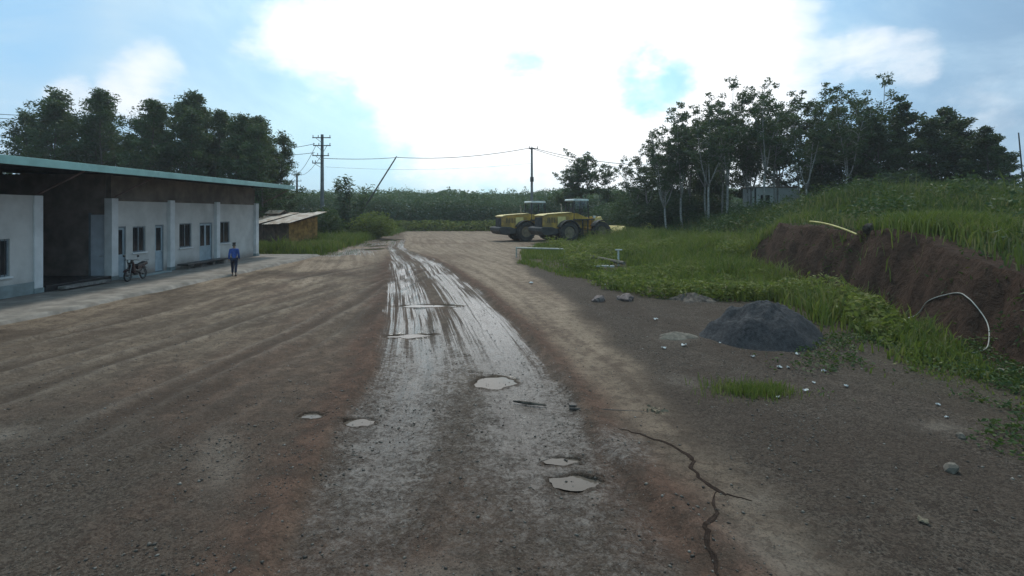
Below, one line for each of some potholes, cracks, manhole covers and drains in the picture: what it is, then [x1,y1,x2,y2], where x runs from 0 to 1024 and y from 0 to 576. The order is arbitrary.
pothole [467,374,524,391]
pothole [542,471,612,495]
crack [618,428,752,576]
pothole [537,457,587,467]
pothole [294,411,329,420]
pothole [338,416,380,429]
